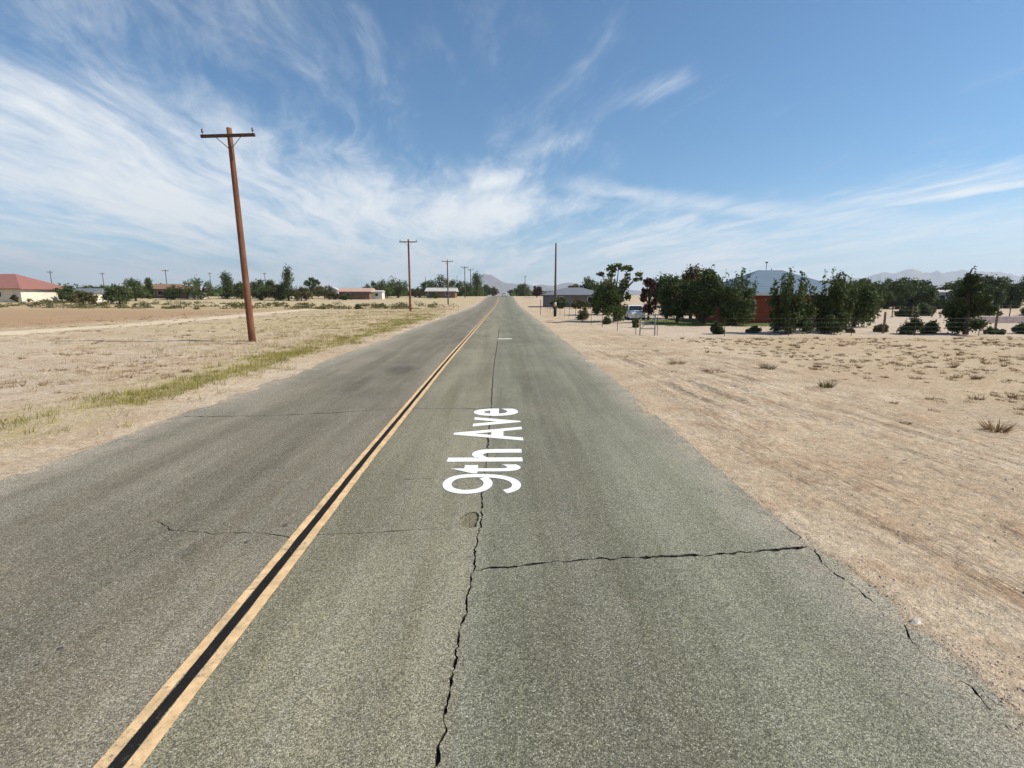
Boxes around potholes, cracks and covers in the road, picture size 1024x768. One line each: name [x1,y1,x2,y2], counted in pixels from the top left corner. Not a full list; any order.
pothole [459,512,479,528]
crack [187,333,875,768]
